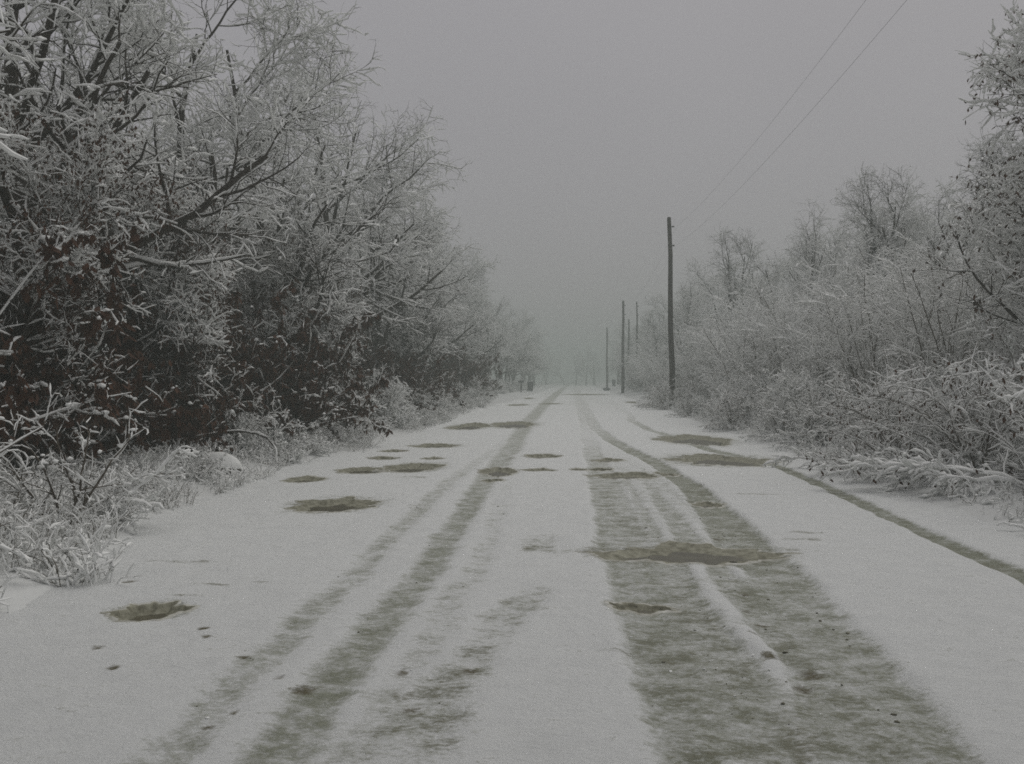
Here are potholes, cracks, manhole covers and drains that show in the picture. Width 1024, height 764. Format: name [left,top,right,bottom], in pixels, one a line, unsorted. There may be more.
pothole [284,496,384,513]
pothole [650,434,733,447]
pothole [279,475,328,483]
pothole [99,600,200,622]
pothole [490,421,535,429]
pothole [575,540,803,567]
pothole [334,466,390,474]
pothole [604,601,682,617]
pothole [372,463,448,473]
pothole [442,422,493,430]
pothole [660,453,782,467]
pothole [583,471,664,480]
